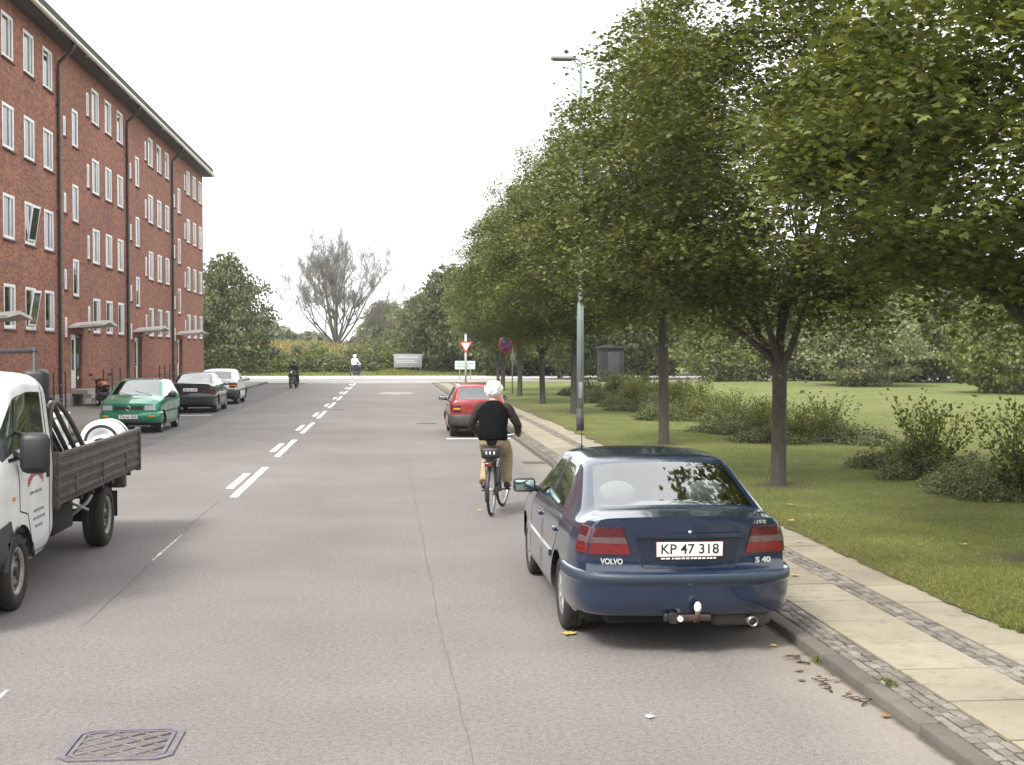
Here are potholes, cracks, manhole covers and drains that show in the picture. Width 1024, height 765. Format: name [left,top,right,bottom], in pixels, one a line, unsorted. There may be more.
manhole cover [57,727,185,763]
